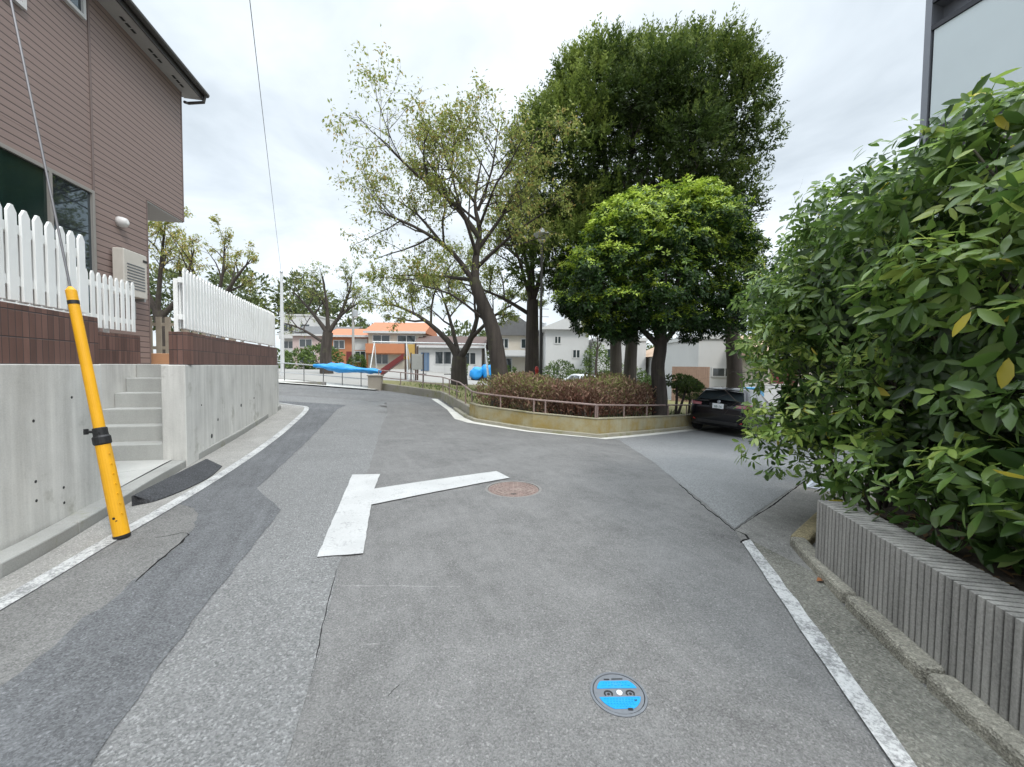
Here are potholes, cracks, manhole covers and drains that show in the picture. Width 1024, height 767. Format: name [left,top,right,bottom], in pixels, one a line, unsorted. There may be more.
manhole cover [485,481,542,497]
crack [135,533,189,582]
crack [311,566,338,676]
utility cover [590,672,648,718]
